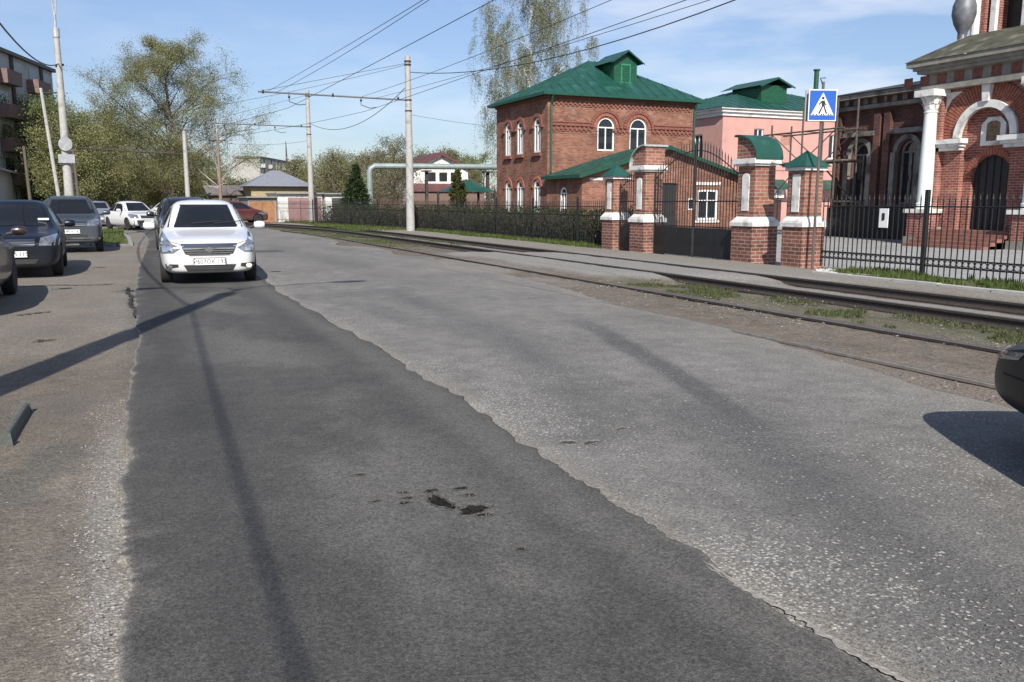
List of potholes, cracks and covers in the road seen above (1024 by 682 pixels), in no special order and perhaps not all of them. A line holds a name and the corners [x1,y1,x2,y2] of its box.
pothole [424,493,461,510]
crack [19,283,138,317]
pothole [458,503,494,516]
